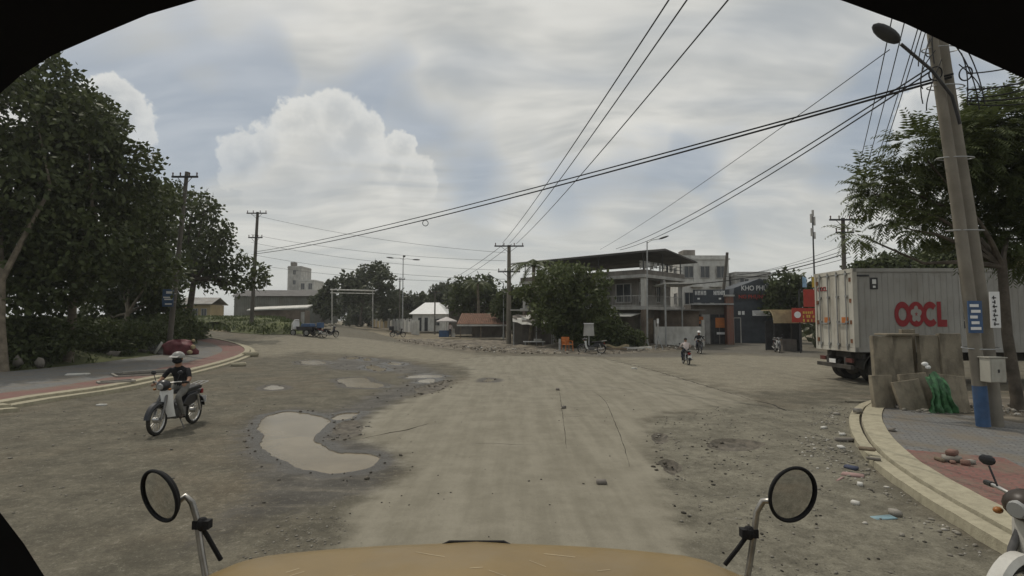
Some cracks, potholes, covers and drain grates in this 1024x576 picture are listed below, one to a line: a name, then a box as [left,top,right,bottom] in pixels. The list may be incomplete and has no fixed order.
pothole [241,410,402,480]
pothole [691,437,768,452]
pothole [335,377,390,388]
pothole [651,433,678,444]
pothole [651,456,682,477]
